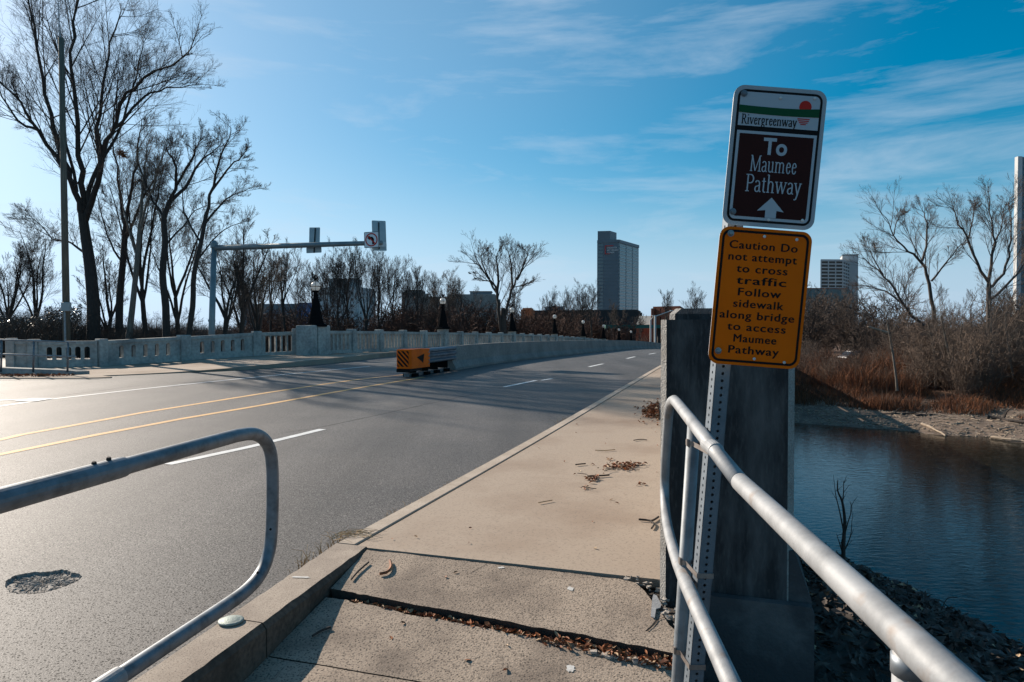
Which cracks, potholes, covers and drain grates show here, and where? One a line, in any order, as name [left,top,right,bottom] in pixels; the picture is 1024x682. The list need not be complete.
pothole [5,569,82,594]
